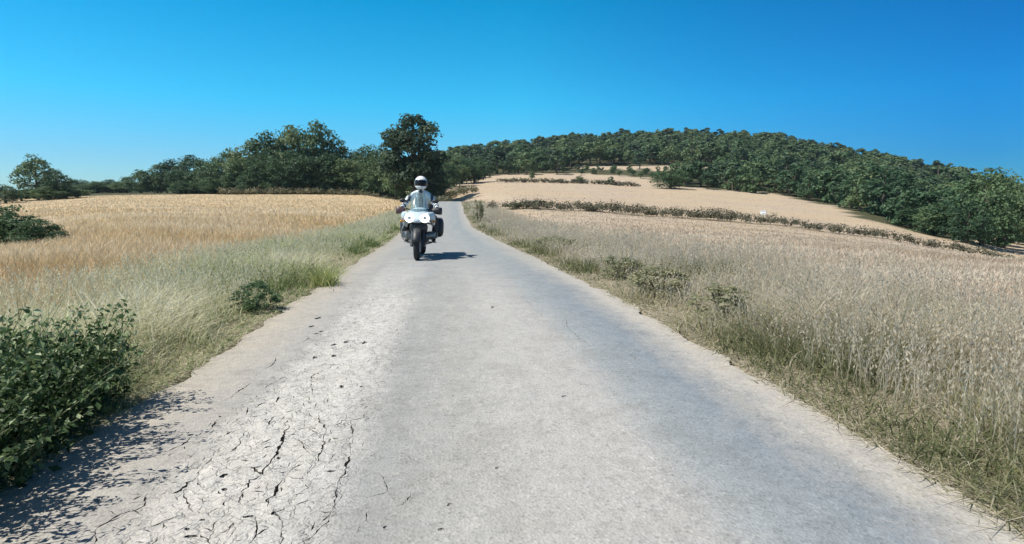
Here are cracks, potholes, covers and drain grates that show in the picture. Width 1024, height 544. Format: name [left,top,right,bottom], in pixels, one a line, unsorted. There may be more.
crack [94,282,419,544]
